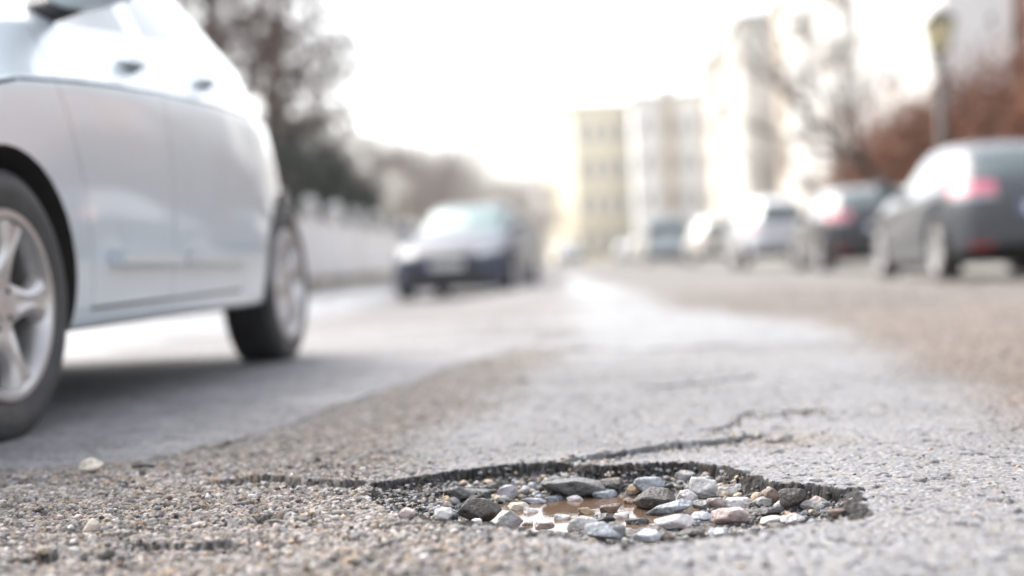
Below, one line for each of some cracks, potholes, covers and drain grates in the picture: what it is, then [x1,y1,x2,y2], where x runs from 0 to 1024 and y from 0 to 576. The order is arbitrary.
crack [188,473,379,489]
crack [566,408,820,463]
pothole [368,460,879,546]
